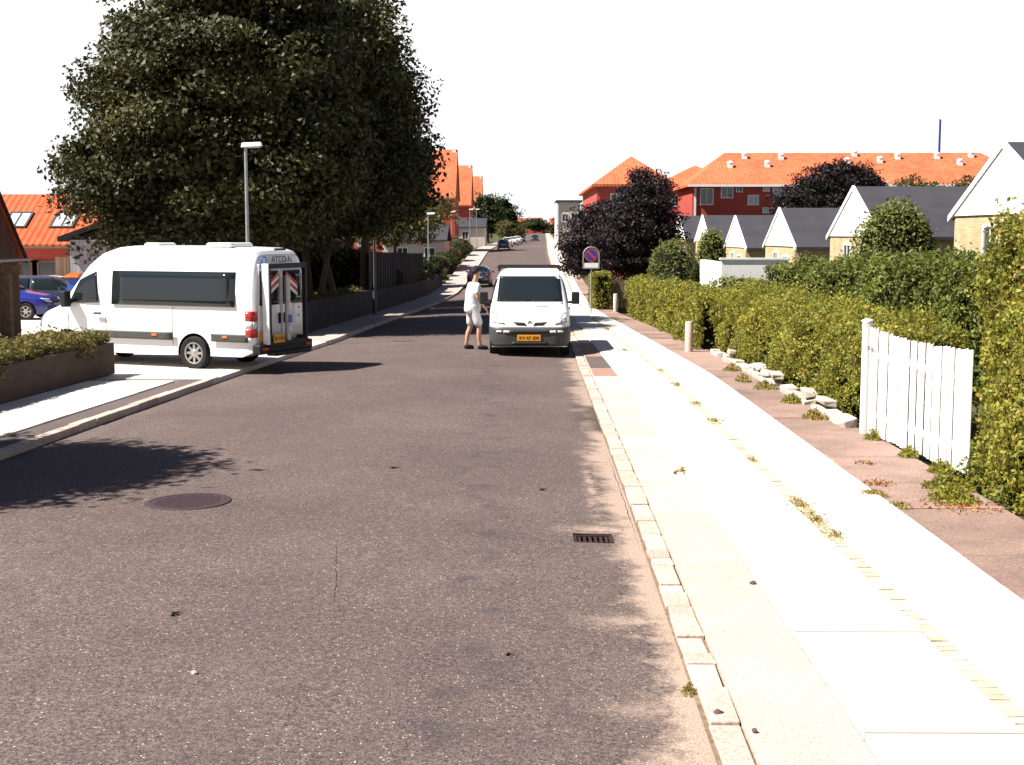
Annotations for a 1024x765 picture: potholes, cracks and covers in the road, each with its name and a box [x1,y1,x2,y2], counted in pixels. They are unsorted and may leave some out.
drain grate [573,534,614,543]
manhole cover [143,493,232,511]
